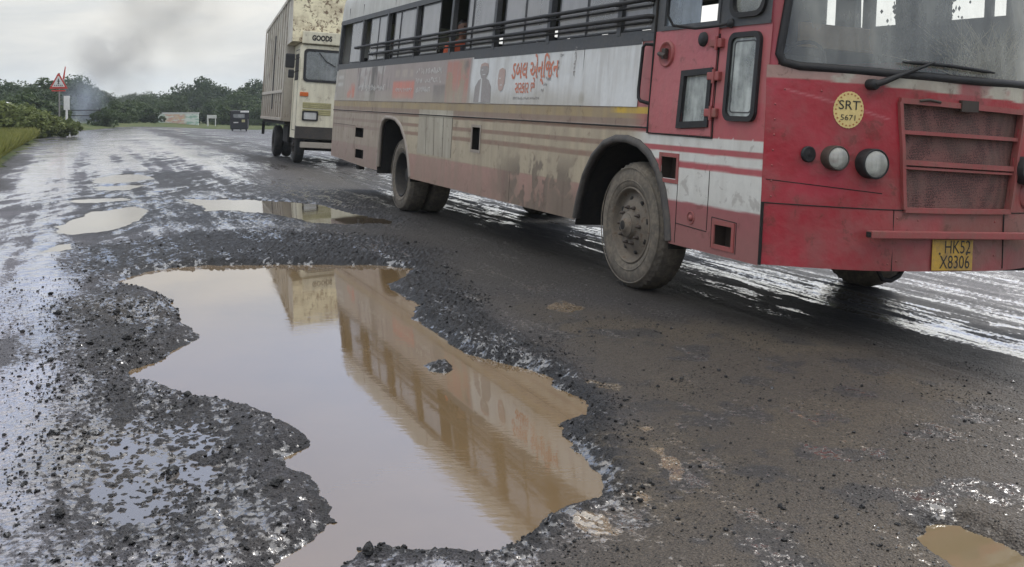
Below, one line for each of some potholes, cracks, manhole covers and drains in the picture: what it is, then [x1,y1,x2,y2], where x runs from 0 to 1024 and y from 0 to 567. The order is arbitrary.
pothole [31,204,167,236]
pothole [159,196,413,225]
pothole [76,172,166,185]
pothole [86,254,662,567]
pothole [881,499,1024,567]
